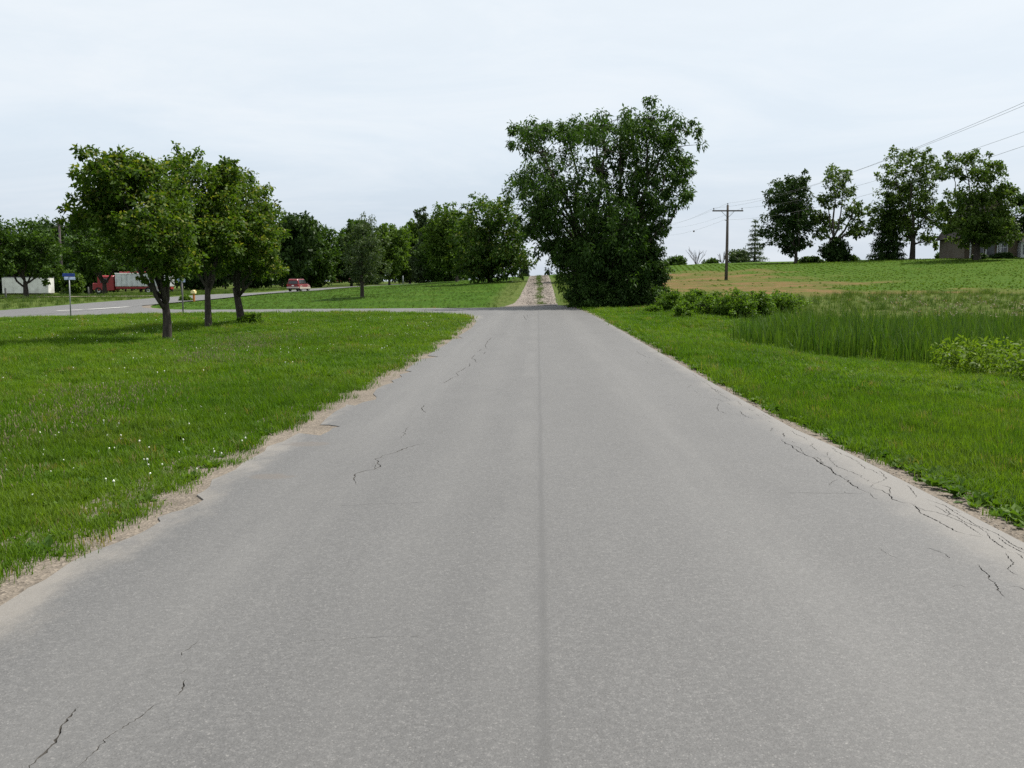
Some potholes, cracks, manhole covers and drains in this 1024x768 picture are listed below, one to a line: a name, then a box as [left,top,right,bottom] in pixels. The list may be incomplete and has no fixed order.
crack [689,374,1024,575]
crack [353,429,419,483]
crack [29,680,185,768]
